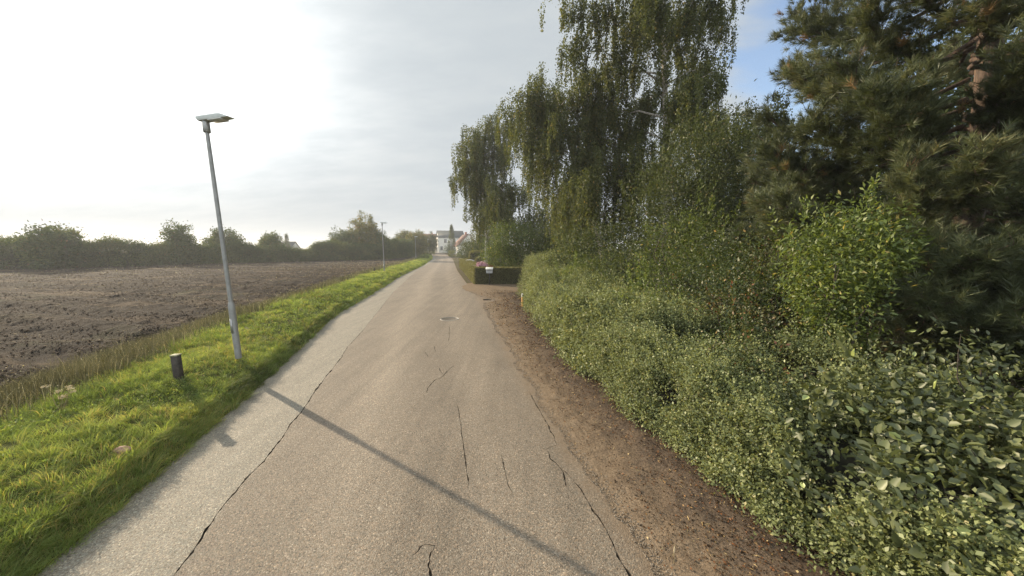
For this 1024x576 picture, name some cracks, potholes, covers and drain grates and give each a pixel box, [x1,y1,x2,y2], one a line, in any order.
crack [529,392,631,576]
crack [415,544,435,576]
crack [173,300,387,576]
crack [458,409,469,483]
